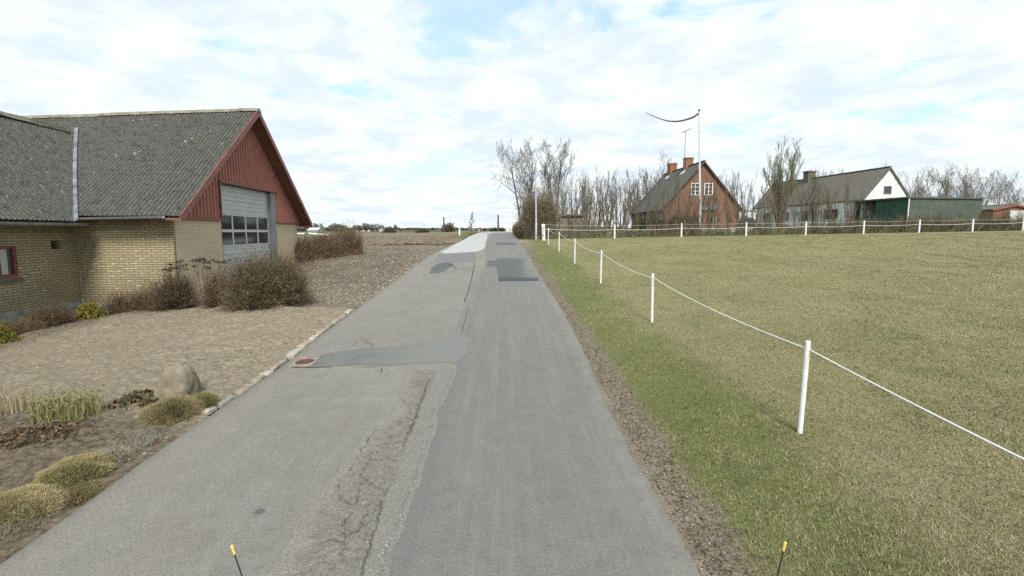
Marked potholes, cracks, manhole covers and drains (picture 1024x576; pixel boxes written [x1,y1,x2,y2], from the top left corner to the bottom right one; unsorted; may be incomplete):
crack [268,364,457,576]
